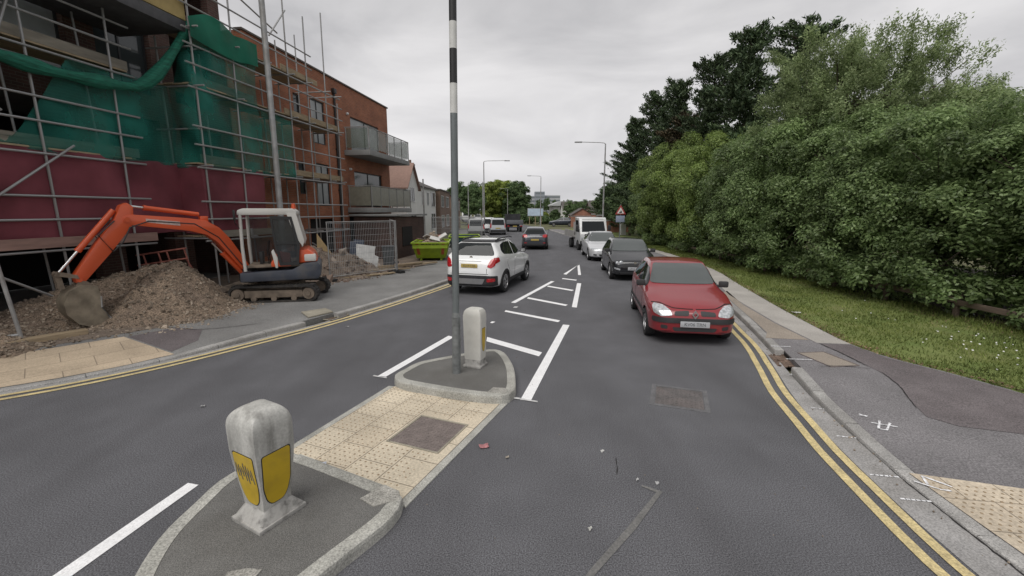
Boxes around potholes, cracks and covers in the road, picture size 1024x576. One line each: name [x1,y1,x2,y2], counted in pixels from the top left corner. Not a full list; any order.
drain grate [769,352,795,367]
manhole cover [386,415,469,454]
manhole cover [649,384,711,413]
